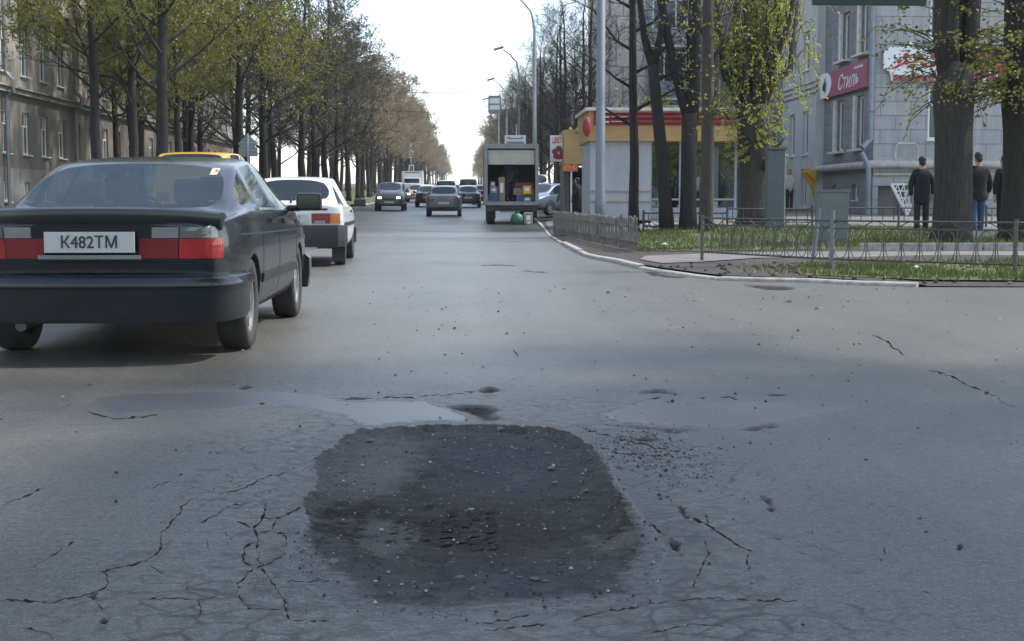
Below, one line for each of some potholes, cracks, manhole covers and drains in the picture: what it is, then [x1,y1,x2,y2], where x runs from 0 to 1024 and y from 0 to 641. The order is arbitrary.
crack [574,515,798,621]
crack [930,370,1016,408]
pothole [445,404,504,423]
crack [4,473,329,622]
